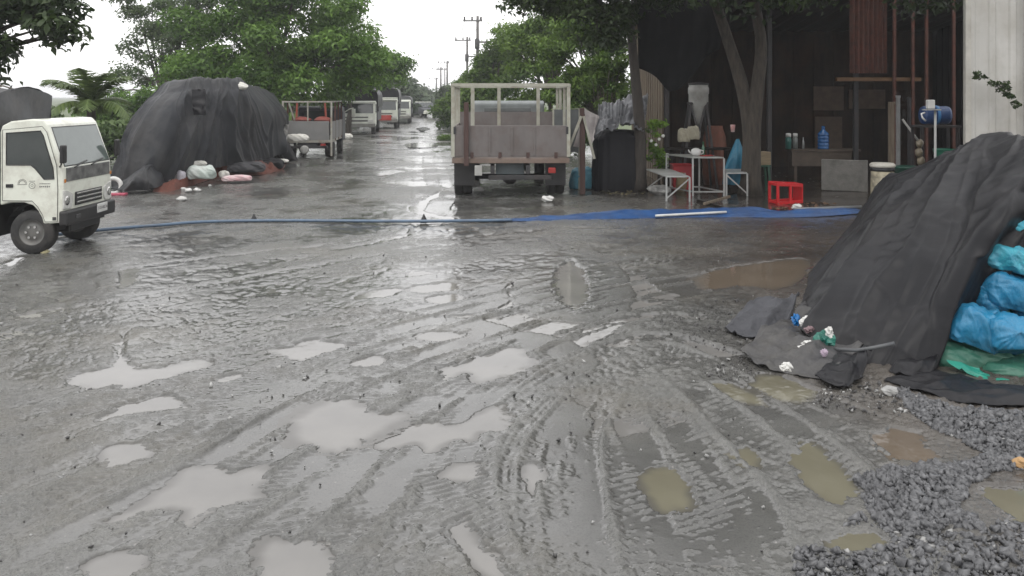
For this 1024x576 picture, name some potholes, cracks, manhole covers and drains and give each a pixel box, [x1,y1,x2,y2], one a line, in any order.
pothole [685,259,811,290]
pothole [712,383,773,407]
pothole [787,440,860,505]
pothole [869,428,941,463]
pothole [551,261,590,310]
pothole [981,487,1024,522]
pothole [822,533,887,551]
pothole [748,374,819,405]
pothole [636,467,699,515]
